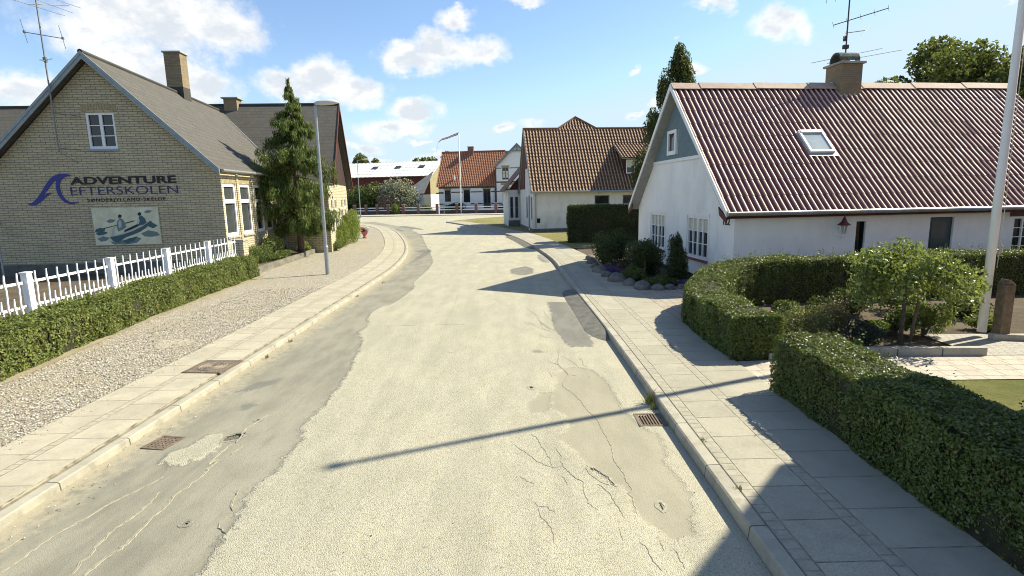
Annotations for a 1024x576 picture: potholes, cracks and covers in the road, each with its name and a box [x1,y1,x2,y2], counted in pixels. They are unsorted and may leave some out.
drain grate [140,435,186,450]
crack [620,531,685,568]
pothole [220,432,249,443]
crack [519,351,637,543]
crack [0,415,268,576]
manhole cover [181,360,243,375]
drain grate [633,413,668,427]
